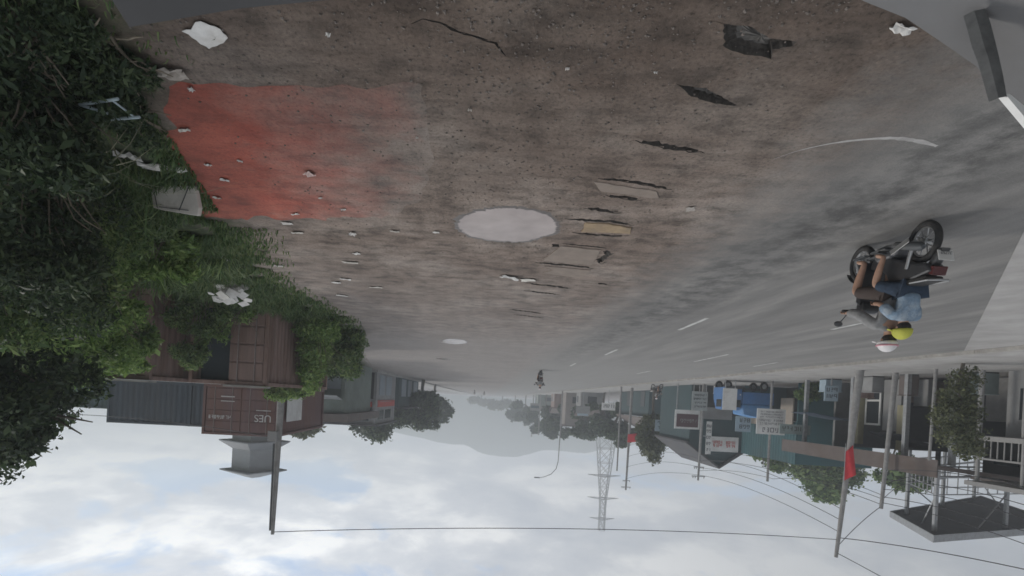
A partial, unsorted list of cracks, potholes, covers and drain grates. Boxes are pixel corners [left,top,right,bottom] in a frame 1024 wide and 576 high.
crack [396,8,519,63]
pothole [709,13,812,63]
crack [508,174,679,318]
pothole [666,77,748,110]
